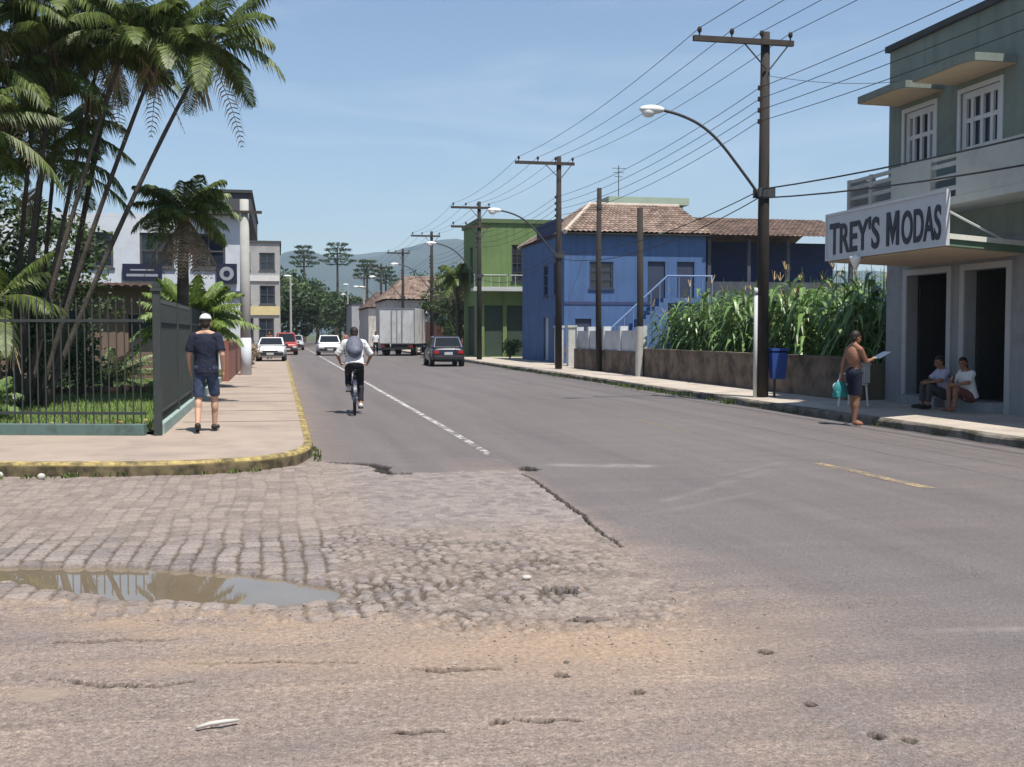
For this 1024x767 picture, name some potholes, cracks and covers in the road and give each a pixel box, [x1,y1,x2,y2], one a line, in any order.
crack [49,660,349,688]
crack [521,473,621,547]
pothole [535,585,580,596]
crack [419,666,502,674]
pothole [866,732,887,741]
pothole [0,562,347,606]
